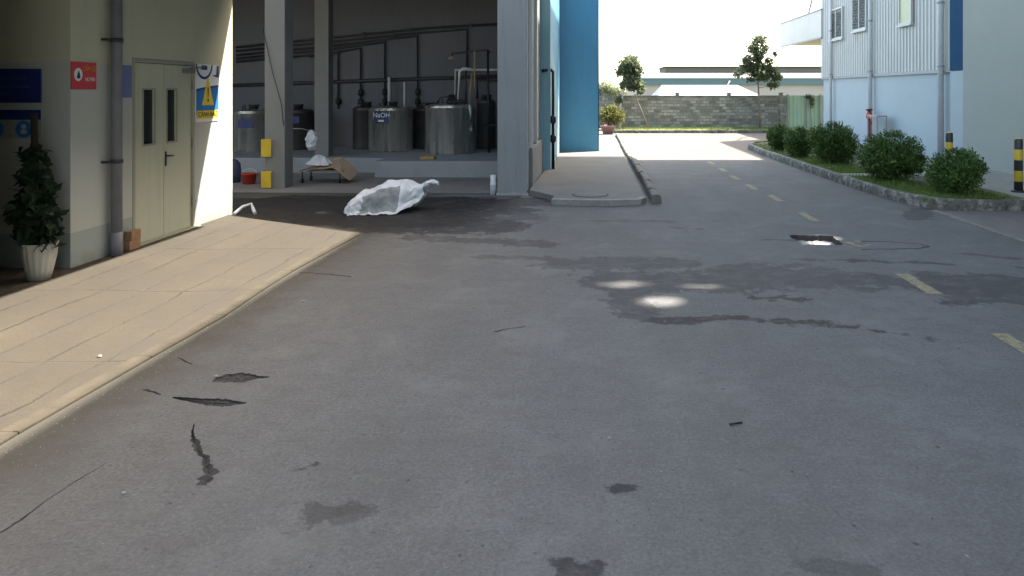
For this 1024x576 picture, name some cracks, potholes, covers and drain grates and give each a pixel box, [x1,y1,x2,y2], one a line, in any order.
pothole [212,373,269,383]
pothole [790,235,843,245]
crack [0,464,104,533]
pothole [172,397,247,407]
crack [861,241,930,250]
crack [190,424,220,485]
